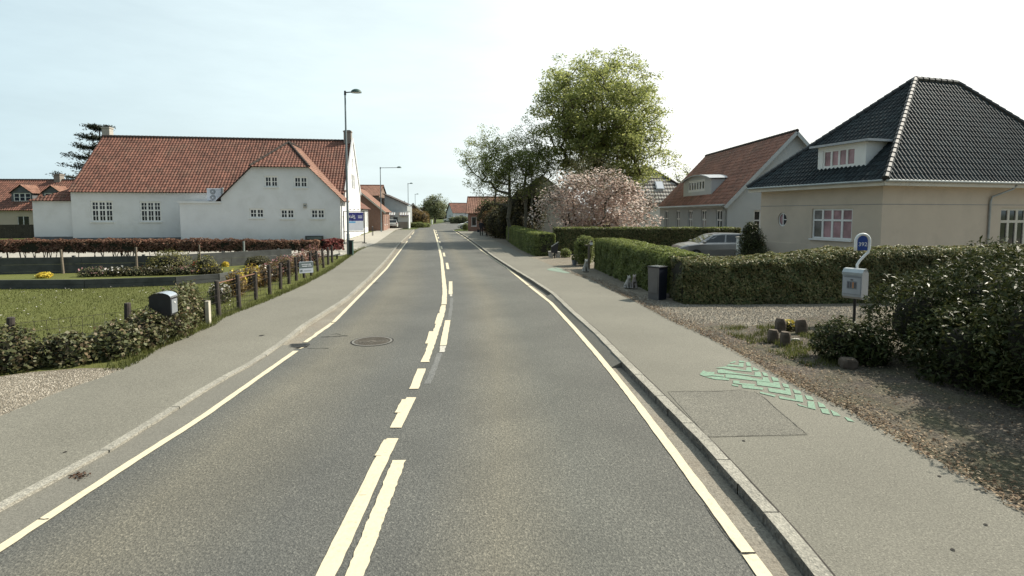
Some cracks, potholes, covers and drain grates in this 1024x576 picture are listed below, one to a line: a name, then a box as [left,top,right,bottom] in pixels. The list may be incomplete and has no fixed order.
manhole cover [350,336,394,346]
